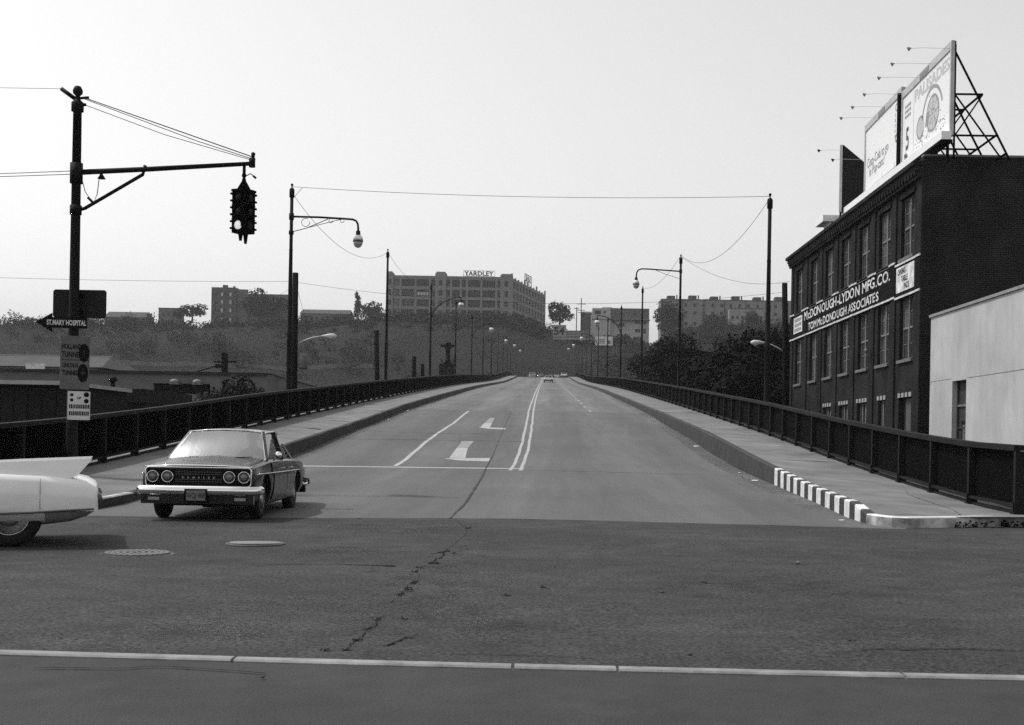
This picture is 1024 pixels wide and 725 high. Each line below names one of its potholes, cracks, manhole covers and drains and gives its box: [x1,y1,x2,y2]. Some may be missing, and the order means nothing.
manhole cover [99,549,175,557]
crack [331,412,516,651]
